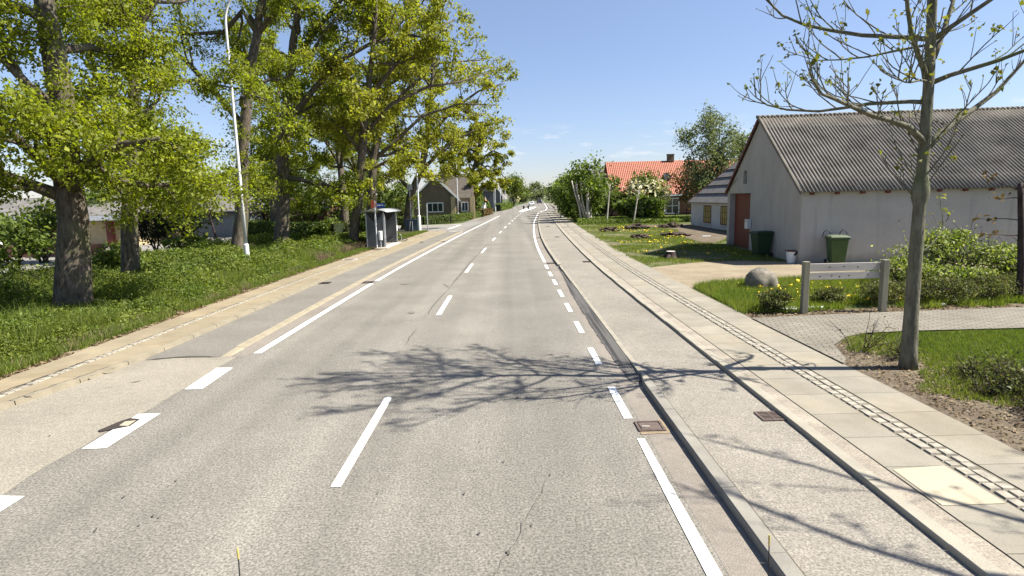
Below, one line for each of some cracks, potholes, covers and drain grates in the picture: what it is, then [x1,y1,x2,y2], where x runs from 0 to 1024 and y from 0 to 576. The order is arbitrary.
crack [494,477,547,576]
